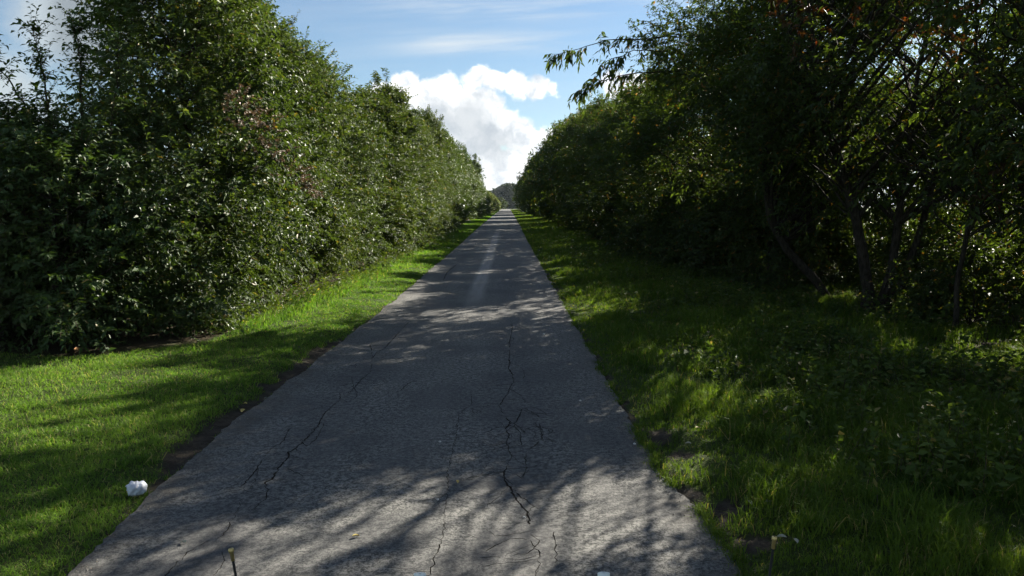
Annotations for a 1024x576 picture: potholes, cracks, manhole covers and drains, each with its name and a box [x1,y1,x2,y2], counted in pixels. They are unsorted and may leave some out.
crack [392,396,475,576]
crack [460,326,575,576]
crack [165,324,405,576]
